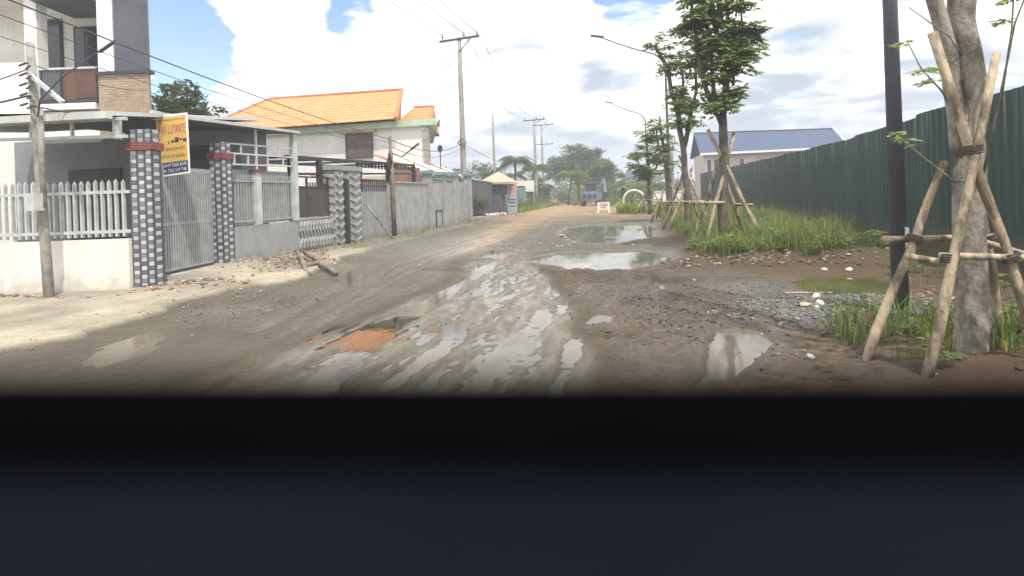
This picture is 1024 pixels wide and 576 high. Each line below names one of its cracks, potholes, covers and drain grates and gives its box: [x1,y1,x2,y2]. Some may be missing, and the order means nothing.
pothole [556,223,662,244]
pothole [518,249,681,271]
pothole [680,318,796,373]
